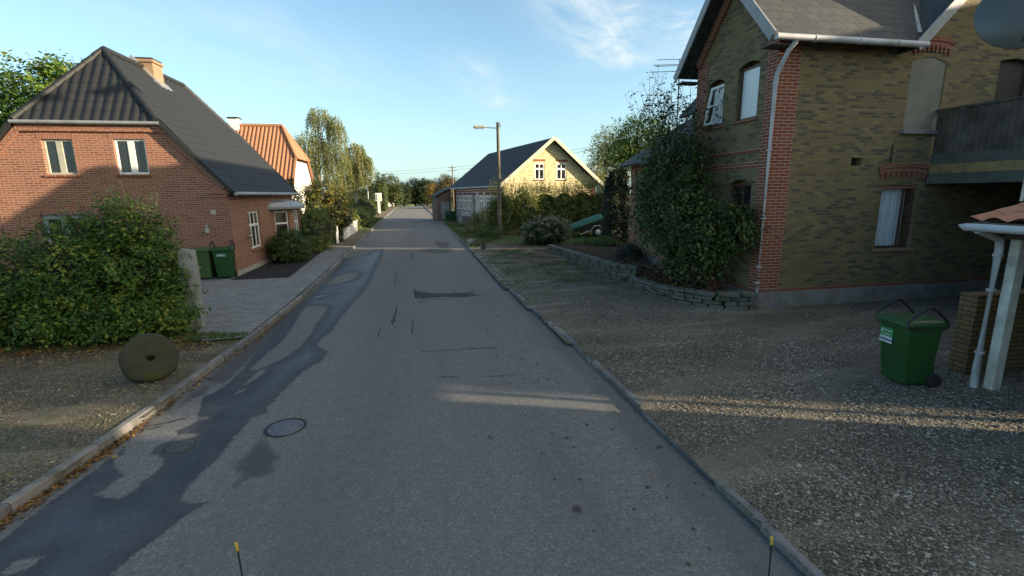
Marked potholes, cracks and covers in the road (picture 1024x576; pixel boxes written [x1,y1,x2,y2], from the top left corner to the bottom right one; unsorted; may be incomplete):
manhole cover [264,418,307,438]
manhole cover [163,438,197,454]
